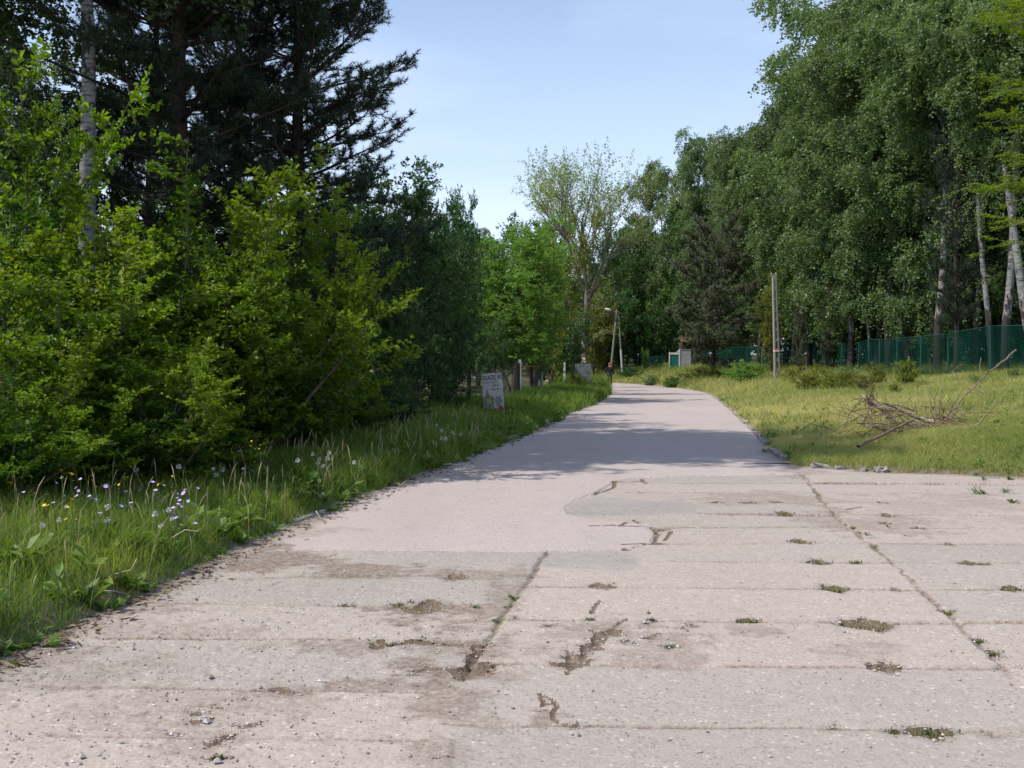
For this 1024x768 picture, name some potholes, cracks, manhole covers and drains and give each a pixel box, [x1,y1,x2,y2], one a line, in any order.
crack [593,479,648,495]
crack [589,520,673,551]
crack [537,693,568,727]
pothole [391,599,447,615]
